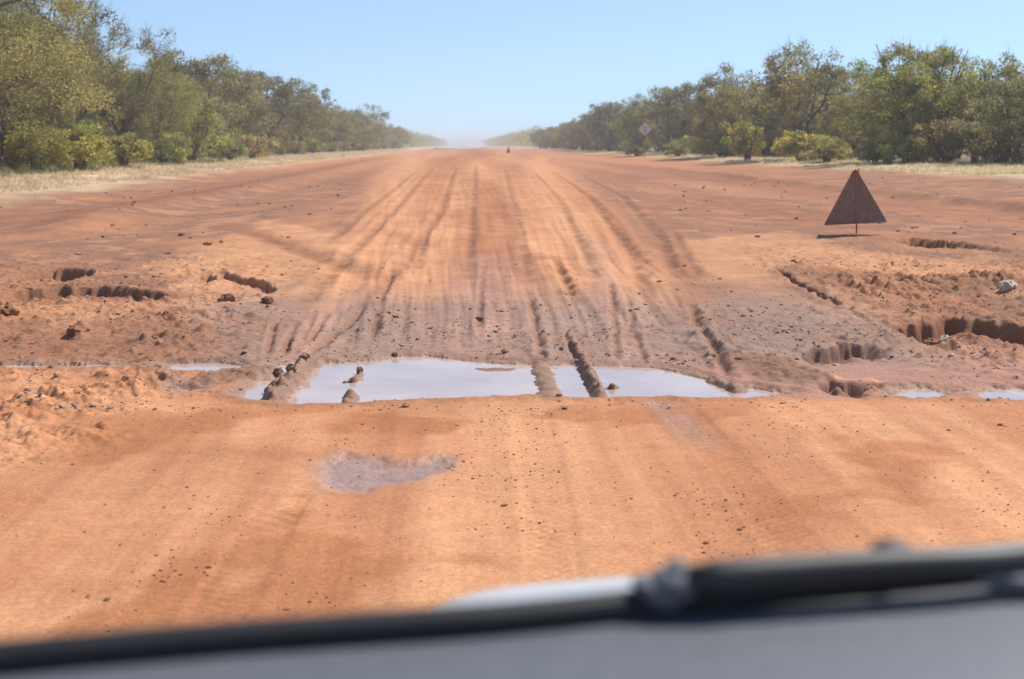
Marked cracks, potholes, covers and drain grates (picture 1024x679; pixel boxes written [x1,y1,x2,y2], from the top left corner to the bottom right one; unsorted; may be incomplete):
pothole [965,383,1024,400]
pothole [950,315,1024,347]
pothole [812,375,888,399]
pothole [211,268,279,296]
pothole [890,238,1024,254]
pothole [226,350,806,404]
pothole [886,314,985,348]
